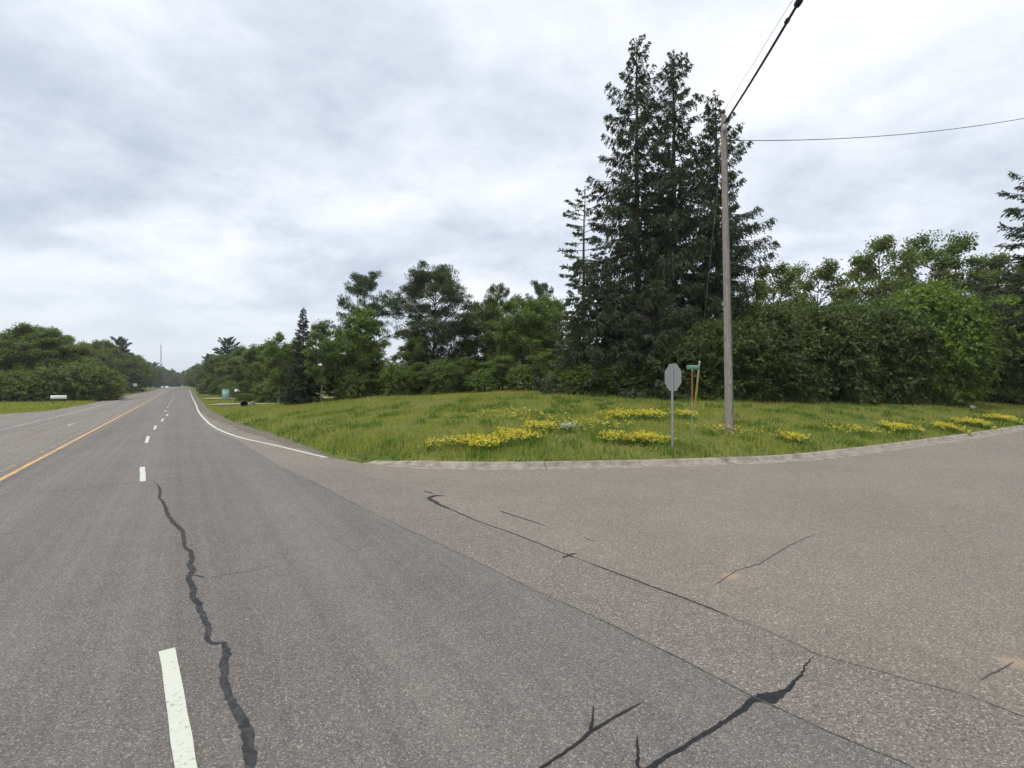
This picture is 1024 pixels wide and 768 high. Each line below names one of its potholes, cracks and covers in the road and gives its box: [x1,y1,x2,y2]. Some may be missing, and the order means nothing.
crack [715,533,818,585]
crack [731,616,1023,716]
